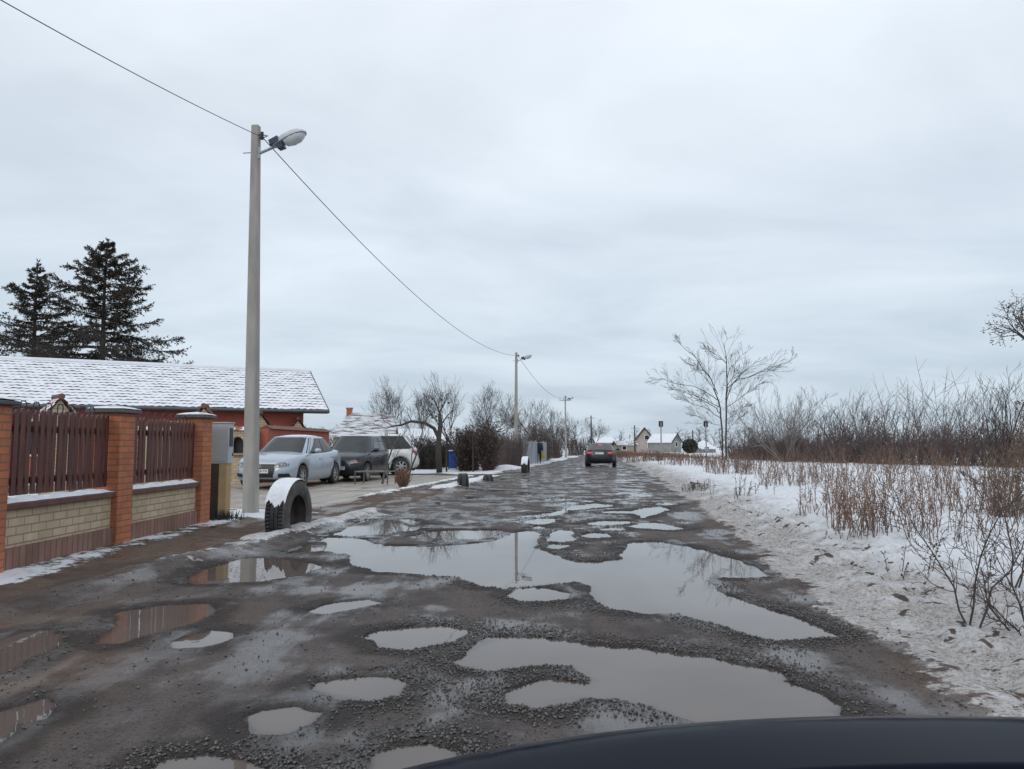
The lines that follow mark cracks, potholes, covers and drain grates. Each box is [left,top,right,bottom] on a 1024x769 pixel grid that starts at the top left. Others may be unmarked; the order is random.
pothole [298,670,421,704]
pothole [0,625,82,676]
pothole [327,518,432,537]
pothole [355,622,480,652]
pothole [519,517,561,525]
pothole [0,691,77,751]
pothole [279,529,849,642]
pothole [441,632,860,723]
pothole [498,509,570,519]
pothole [227,698,338,740]
pothole [557,503,618,511]
pothole [622,521,687,531]
